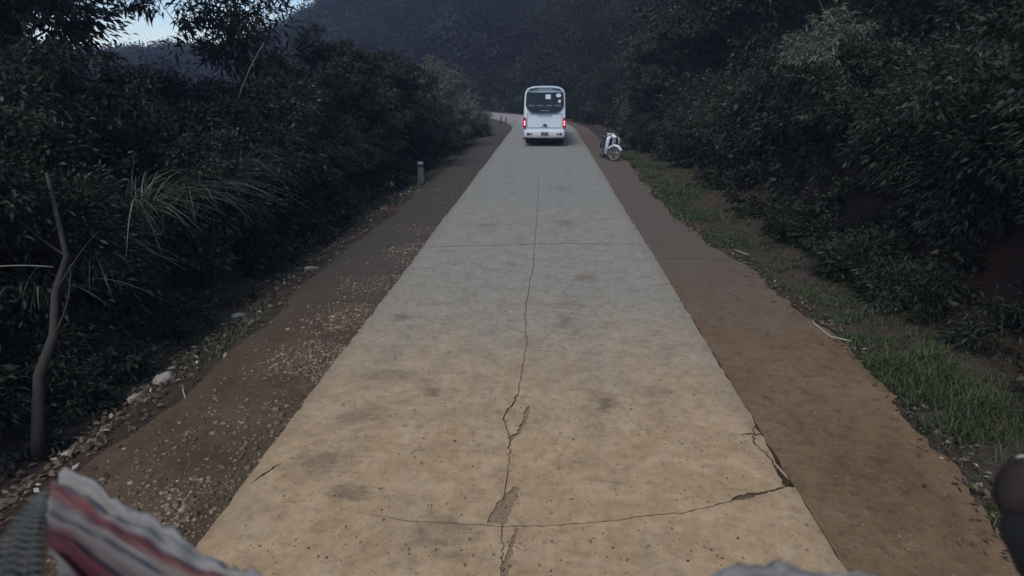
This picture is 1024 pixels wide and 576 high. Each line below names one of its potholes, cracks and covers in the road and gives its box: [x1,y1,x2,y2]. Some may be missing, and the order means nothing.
crack [362,174,784,576]
